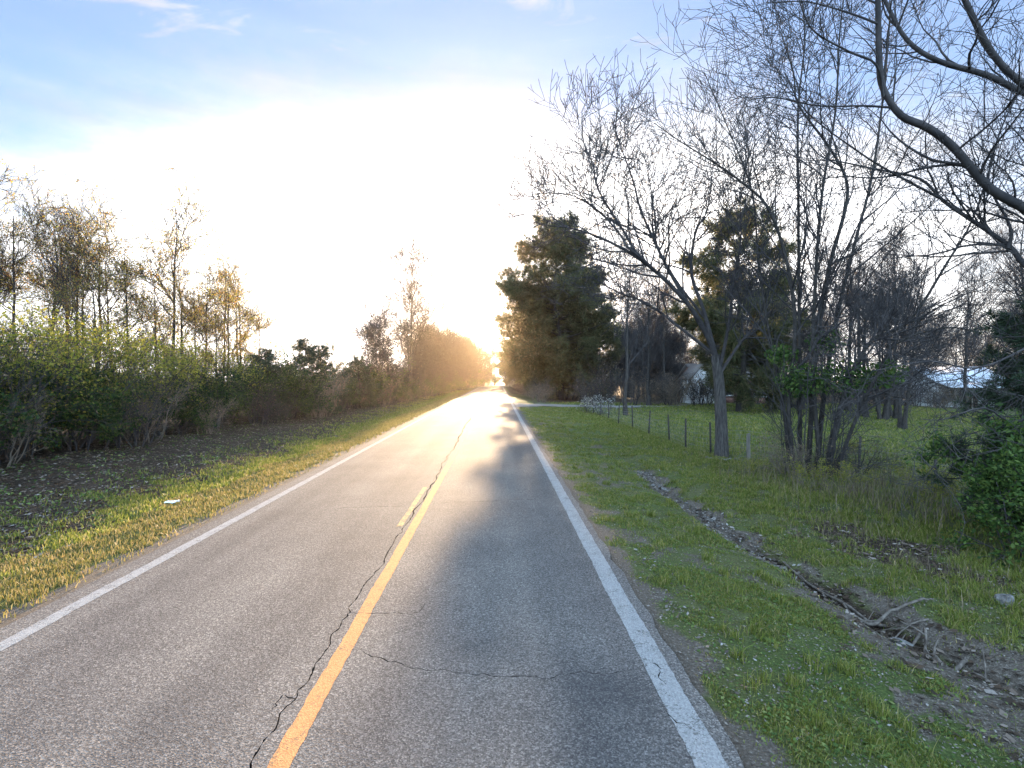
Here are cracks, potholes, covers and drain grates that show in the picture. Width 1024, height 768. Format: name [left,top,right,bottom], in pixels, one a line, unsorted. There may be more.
crack [249,418,528,768]
crack [364,652,623,679]
